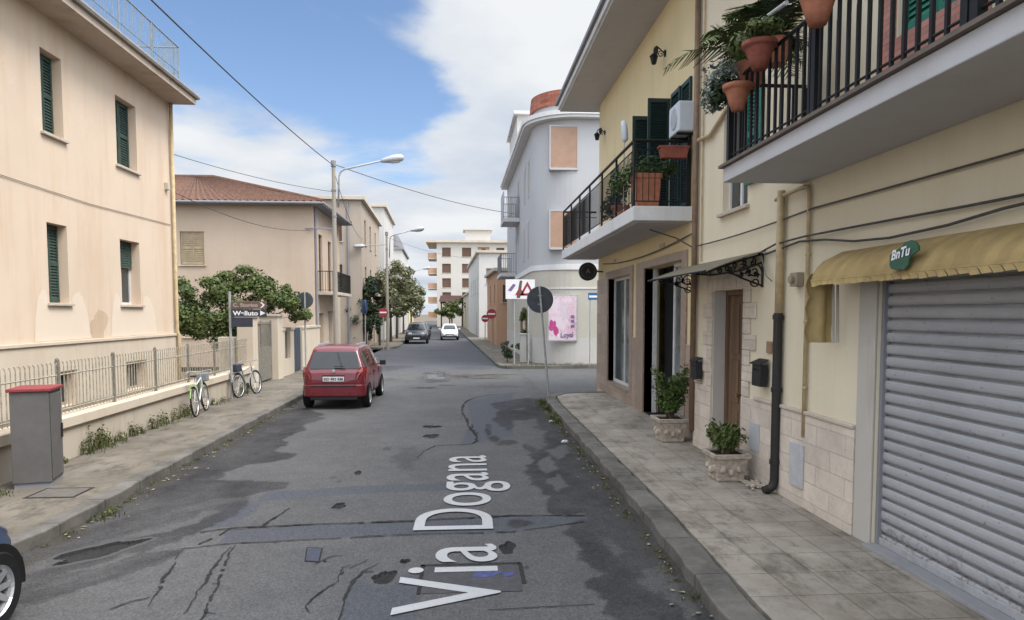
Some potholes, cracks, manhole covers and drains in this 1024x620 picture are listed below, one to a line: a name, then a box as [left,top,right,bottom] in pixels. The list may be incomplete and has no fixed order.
crack [305,555,378,620]
pothole [44,537,158,568]
manhole cover [23,487,95,499]
pothole [365,568,405,587]
manhole cover [305,547,323,563]
pothole [326,501,351,510]
crack [109,547,234,620]
pothole [495,539,523,557]
crack [417,374,516,458]
